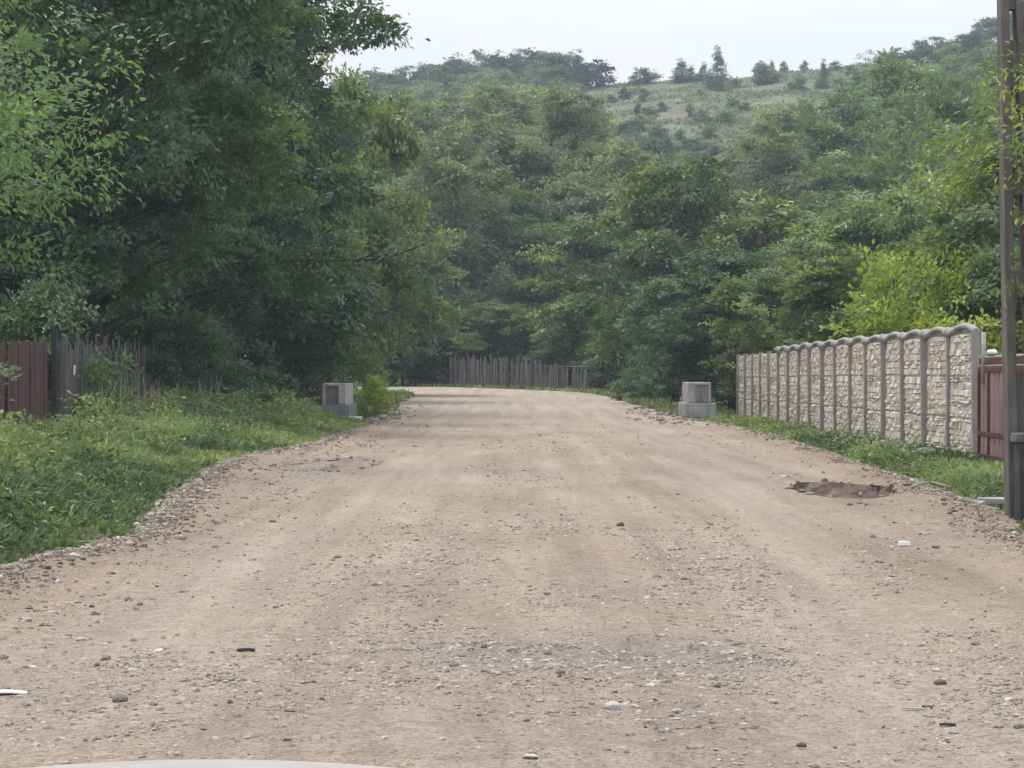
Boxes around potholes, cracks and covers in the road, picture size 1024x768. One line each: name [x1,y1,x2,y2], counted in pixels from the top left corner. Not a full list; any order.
pothole [269,457,384,472]
pothole [784,478,903,499]
